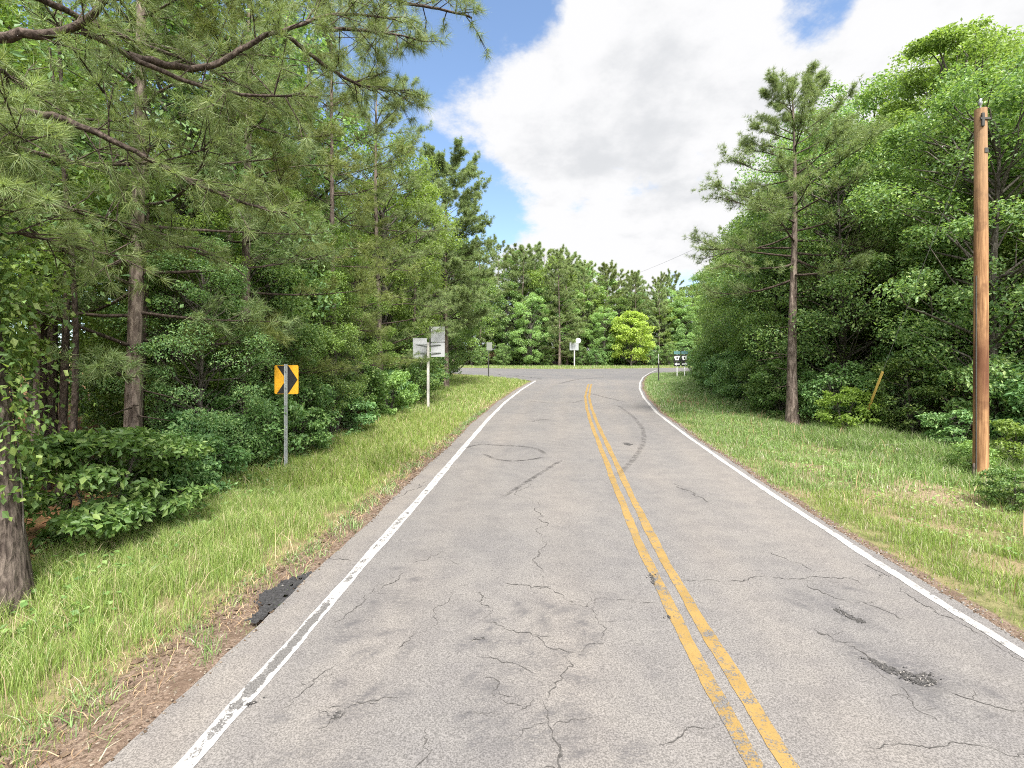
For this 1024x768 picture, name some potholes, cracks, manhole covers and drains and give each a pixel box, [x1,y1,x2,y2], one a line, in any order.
crack [867,741,1022,763]
pothole [894,667,942,686]
crack [335,553,457,624]
pothole [860,656,903,677]
crack [462,487,650,768]
crack [322,696,401,728]
crack [816,630,938,721]
crack [688,552,899,618]
crack [948,690,1024,712]
